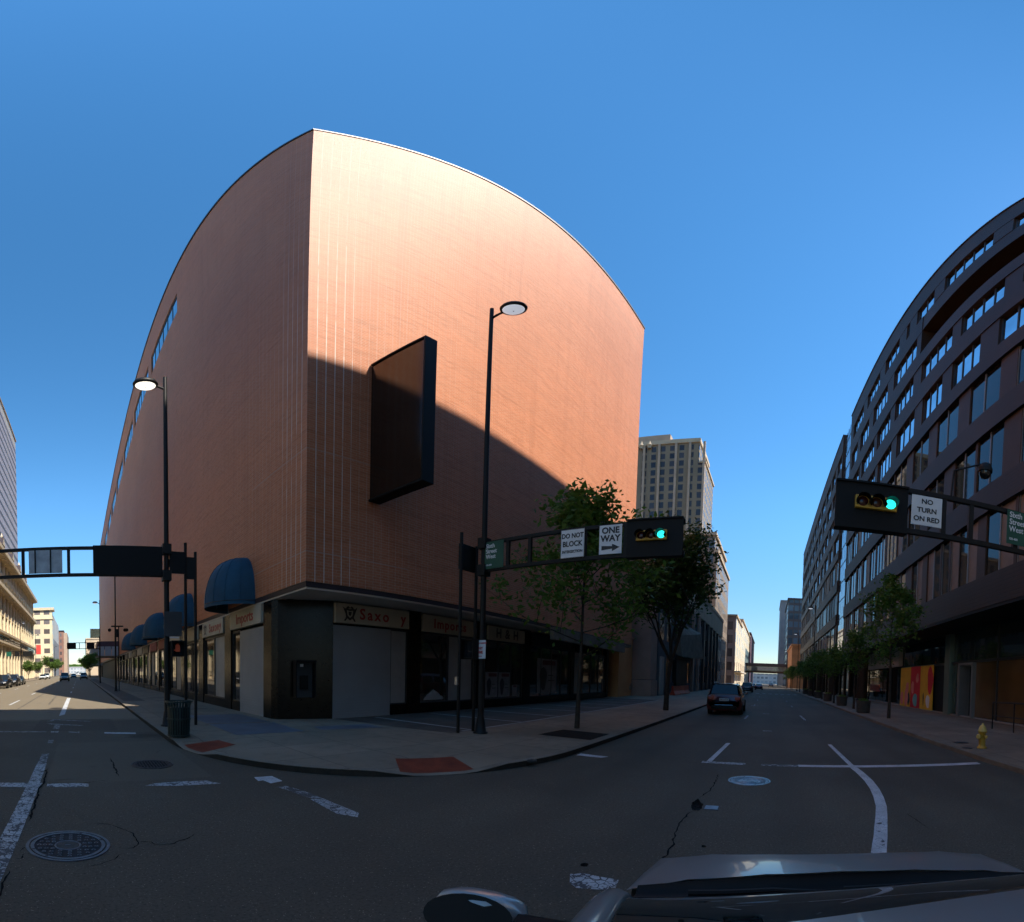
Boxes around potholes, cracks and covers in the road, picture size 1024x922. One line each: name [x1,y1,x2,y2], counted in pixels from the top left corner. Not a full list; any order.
manhole cover [26,831,110,862]
crack [662,775,719,858]
pothole [690,798,704,811]
crack [29,760,119,820]
crack [86,823,194,867]
manhole cover [728,776,771,786]
